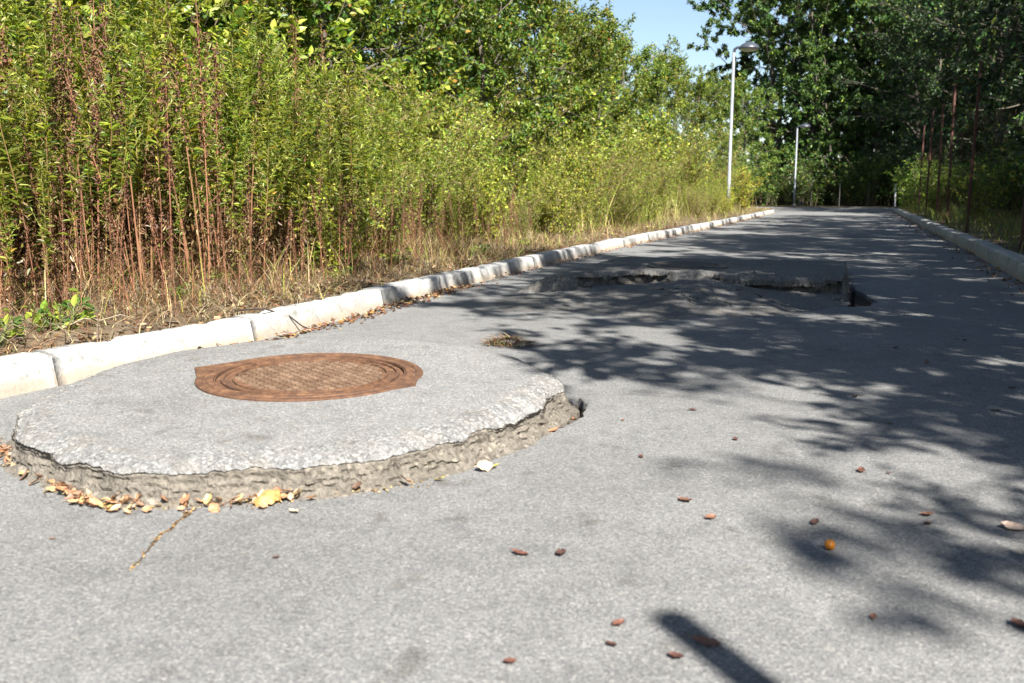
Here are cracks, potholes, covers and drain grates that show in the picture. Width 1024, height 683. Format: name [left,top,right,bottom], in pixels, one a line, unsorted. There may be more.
manhole cover [194,353,423,402]
crack [128,508,197,571]
pothole [833,284,878,307]
